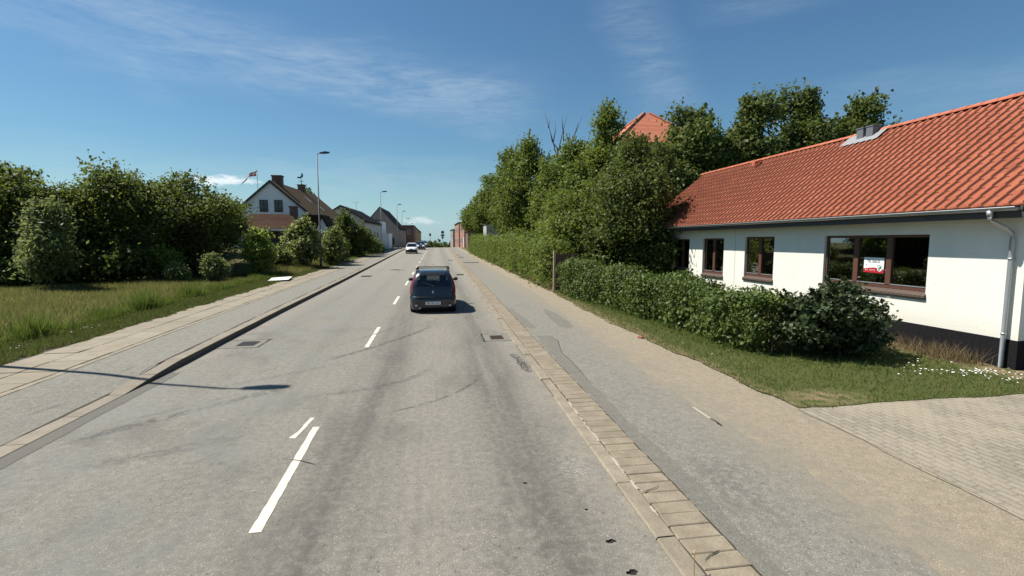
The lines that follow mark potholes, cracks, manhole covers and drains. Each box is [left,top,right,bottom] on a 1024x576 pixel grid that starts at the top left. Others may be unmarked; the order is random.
drain grate [481,333,511,342]
drain grate [215,339,271,349]
